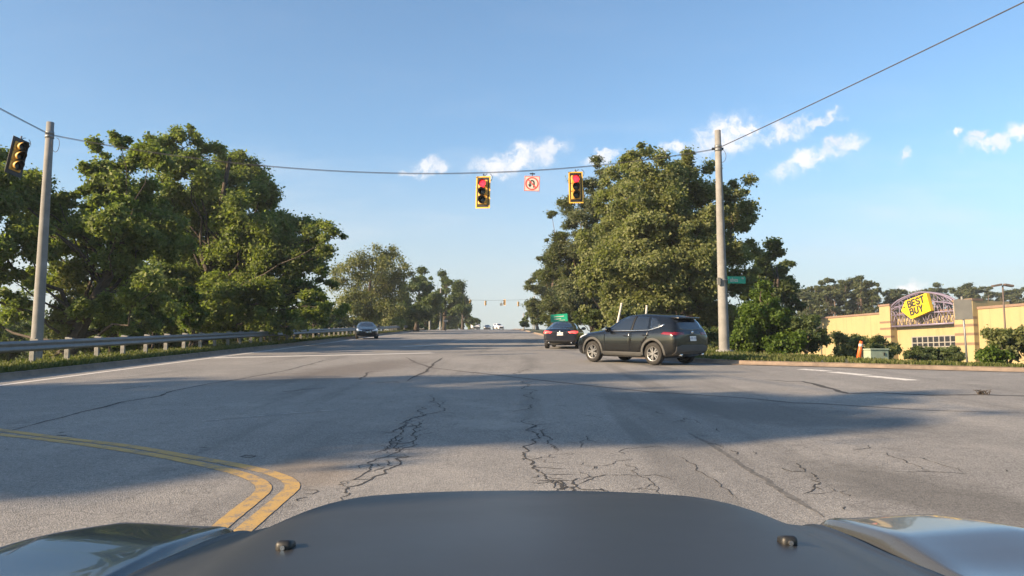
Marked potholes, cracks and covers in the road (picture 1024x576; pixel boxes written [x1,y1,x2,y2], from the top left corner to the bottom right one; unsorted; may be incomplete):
crack [508,370,670,494]
crack [339,396,447,499]
crack [656,410,850,510]
crack [4,359,329,434]
crack [854,446,1008,474]
